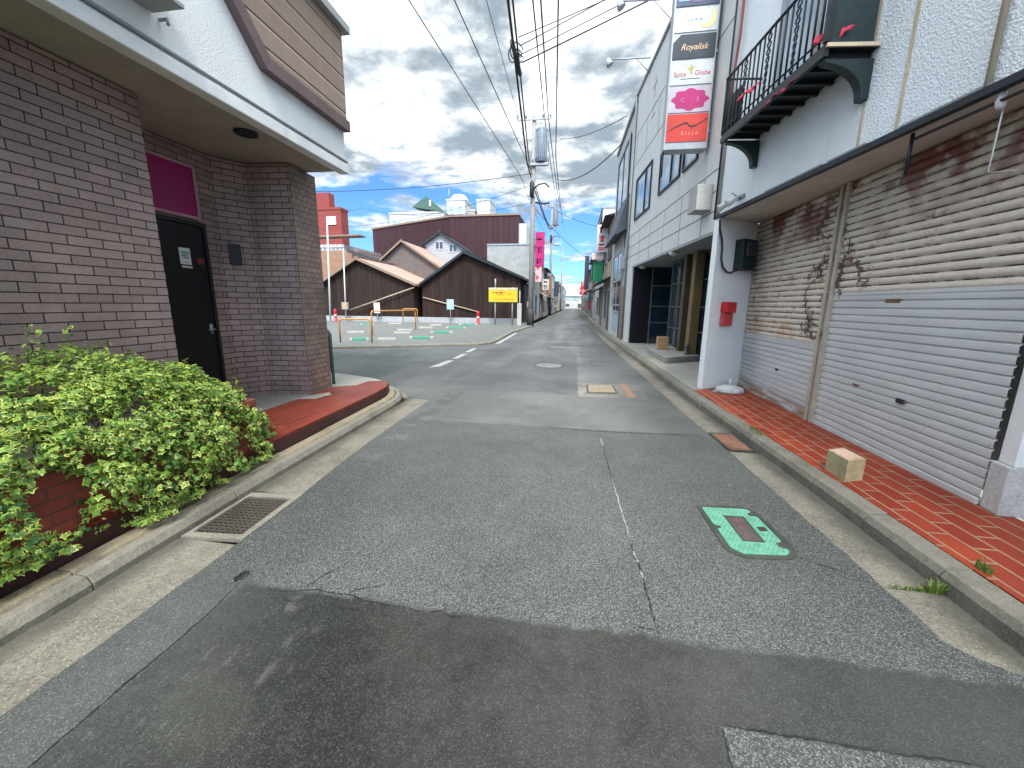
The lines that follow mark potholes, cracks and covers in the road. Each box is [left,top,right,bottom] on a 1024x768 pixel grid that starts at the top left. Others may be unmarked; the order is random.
crack [270,562,460,618]
drain grate [709,433,755,453]
drain grate [181,492,302,545]
manhole cover [587,385,618,394]
crack [426,413,687,632]
manhole cover [697,505,797,560]
